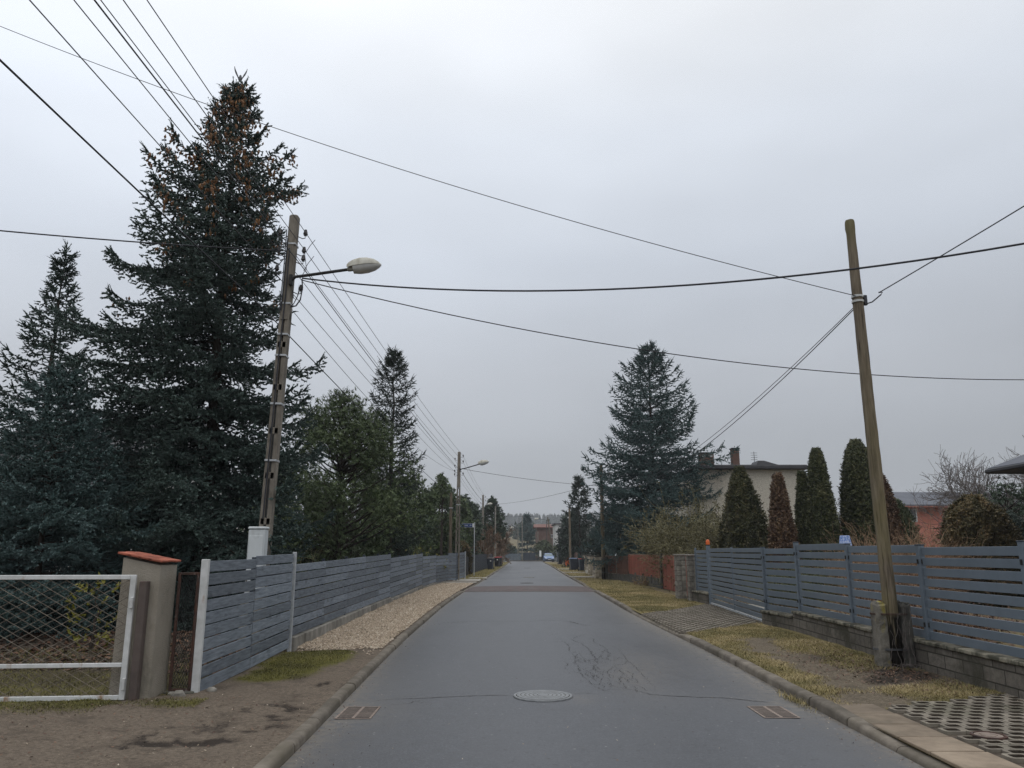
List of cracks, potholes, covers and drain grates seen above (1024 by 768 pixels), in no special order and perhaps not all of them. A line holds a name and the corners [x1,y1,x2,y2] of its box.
manhole cover [513,690,573,702]
crack [557,637,766,702]
drain grate [334,706,381,719]
utility cover [969,731,1008,740]
drain grate [747,706,801,718]
